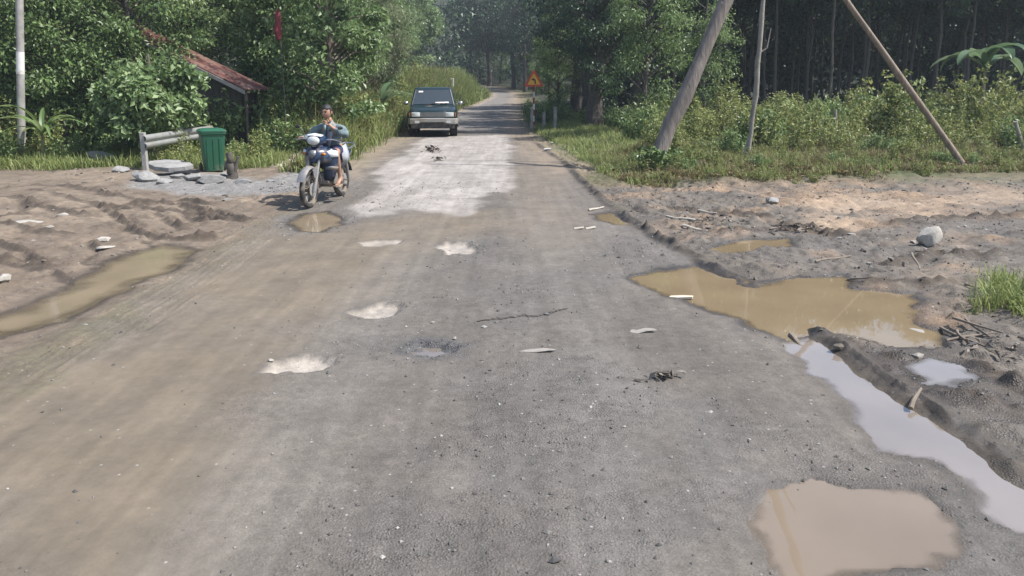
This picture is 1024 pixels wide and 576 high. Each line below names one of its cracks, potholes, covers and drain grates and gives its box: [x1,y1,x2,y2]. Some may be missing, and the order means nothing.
pothole [401,339,464,358]
crack [477,308,568,322]
